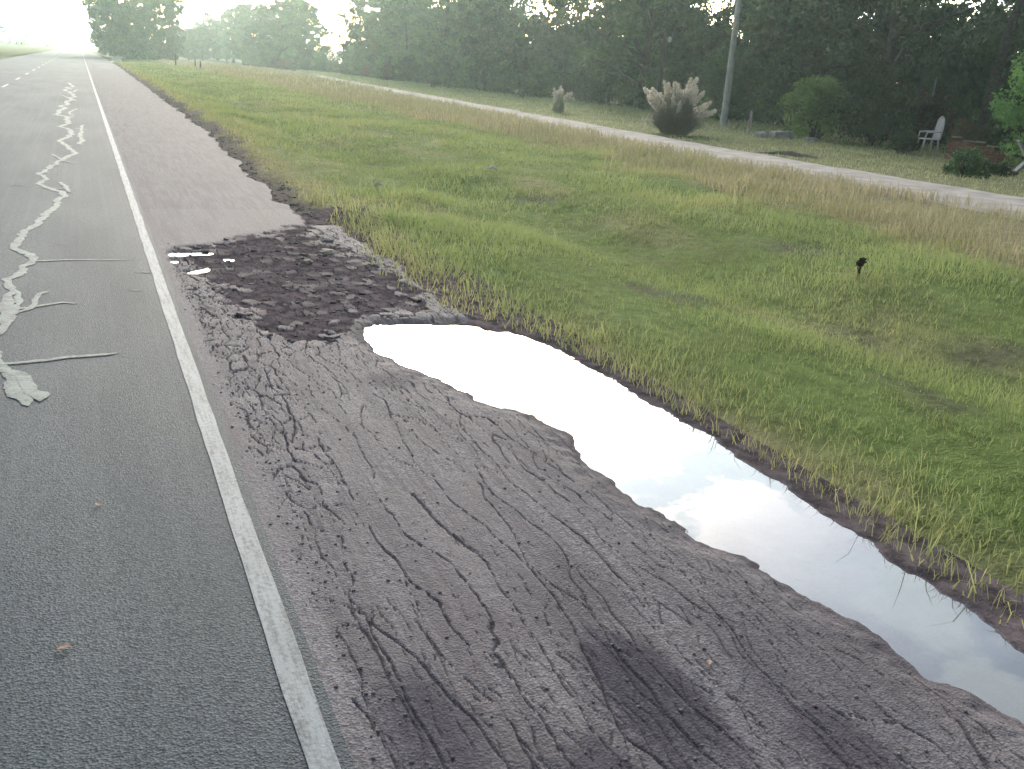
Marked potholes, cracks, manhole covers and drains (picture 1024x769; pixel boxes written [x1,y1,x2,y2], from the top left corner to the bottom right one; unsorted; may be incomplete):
pothole [170,224,430,346]
crack [170,229,1024,769]
pothole [359,322,1024,729]
crack [0,83,116,406]
